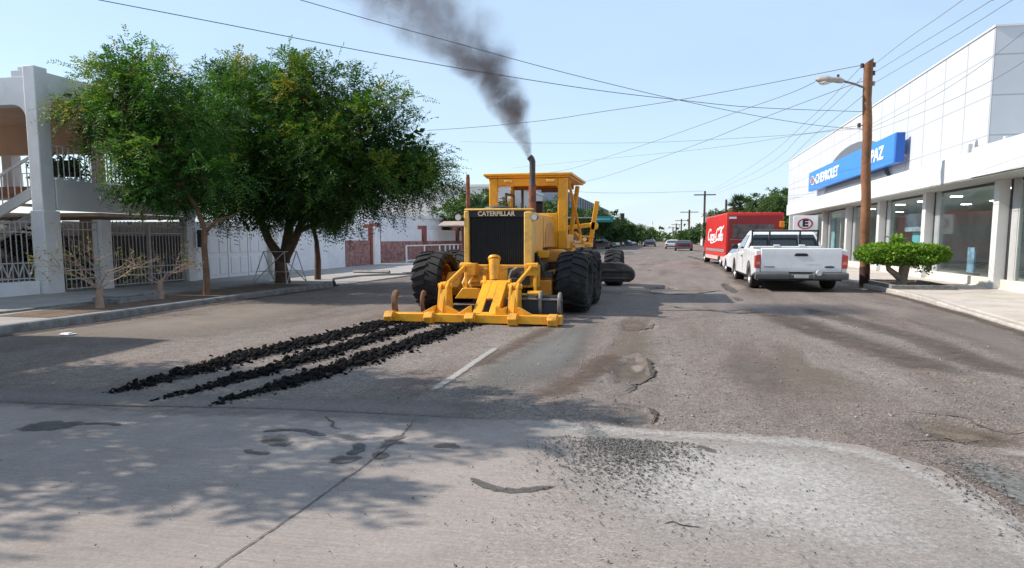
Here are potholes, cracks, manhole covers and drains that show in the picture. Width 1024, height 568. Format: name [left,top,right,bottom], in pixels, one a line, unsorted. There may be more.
pothole [618,414,648,424]
crack [903,408,1024,442]
